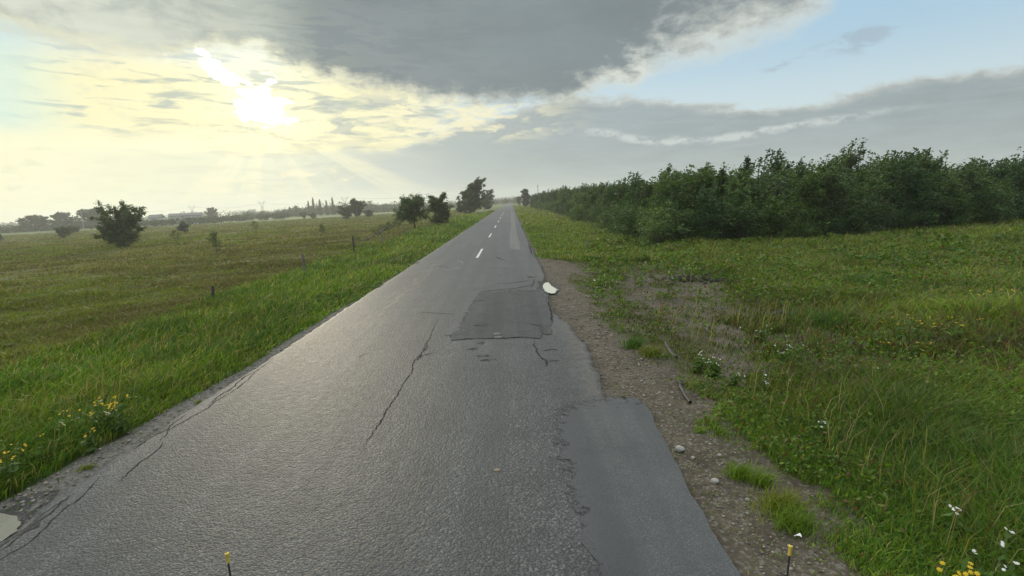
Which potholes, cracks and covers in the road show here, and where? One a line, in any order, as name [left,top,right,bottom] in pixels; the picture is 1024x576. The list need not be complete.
crack [124,361,270,477]
crack [363,276,558,450]
crack [1,478,99,559]
